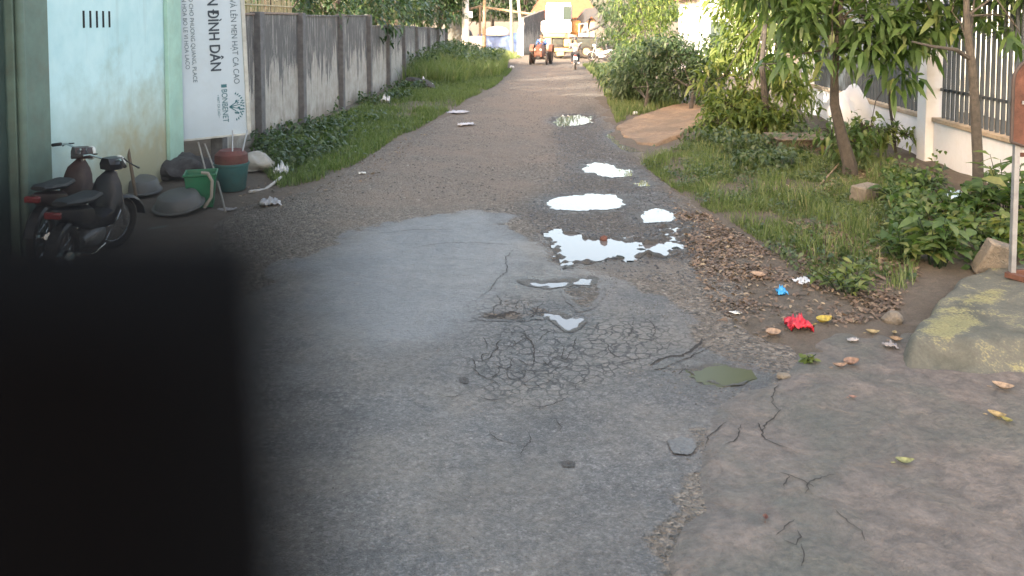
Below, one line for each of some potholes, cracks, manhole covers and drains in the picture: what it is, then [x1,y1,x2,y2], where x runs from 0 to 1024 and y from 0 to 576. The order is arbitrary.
crack [780,472,828,493]
pothole [579,161,637,178]
crack [386,229,599,430]
pothole [543,221,695,270]
pothole [550,113,595,127]
pothole [634,205,680,224]
pothole [685,364,757,388]
crack [776,520,805,566]
crack [706,385,788,448]
crack [595,318,713,374]
pothole [541,192,630,212]
pothole [517,276,599,289]
